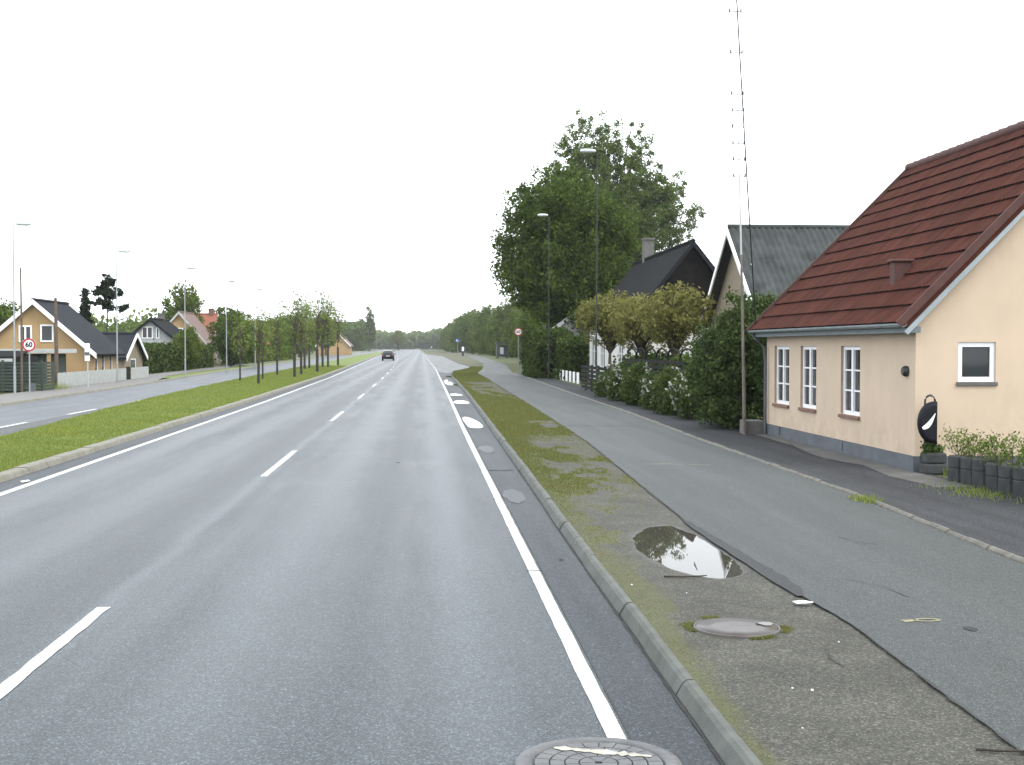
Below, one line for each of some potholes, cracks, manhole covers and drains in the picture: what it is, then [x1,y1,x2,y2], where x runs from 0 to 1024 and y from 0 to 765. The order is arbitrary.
manhole cover [693,617,781,639]
manhole cover [515,737,682,765]
